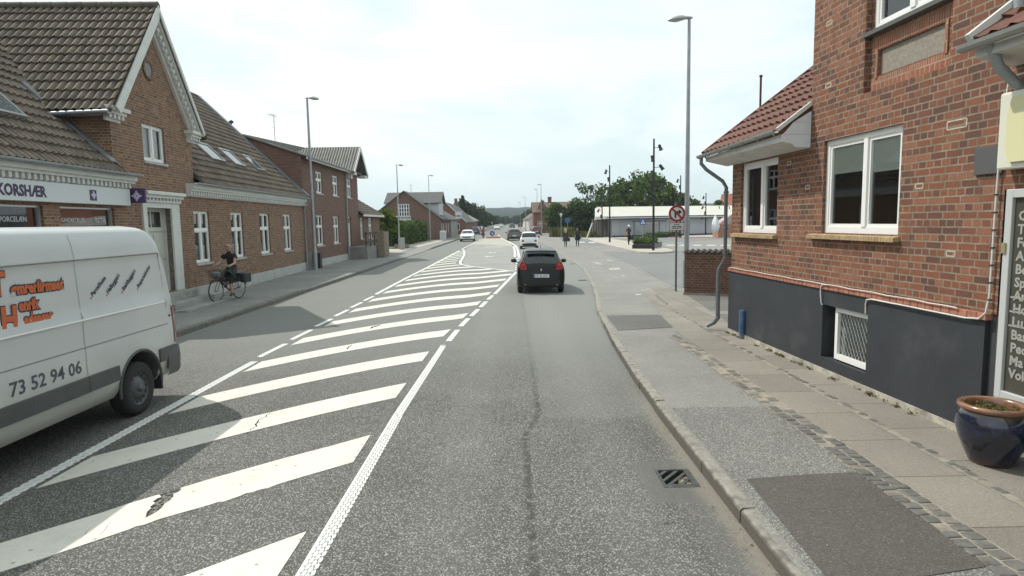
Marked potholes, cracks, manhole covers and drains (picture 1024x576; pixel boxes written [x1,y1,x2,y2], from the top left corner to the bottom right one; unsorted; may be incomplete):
crack [179,415,267,488]
drain grate [654,468,701,488]
